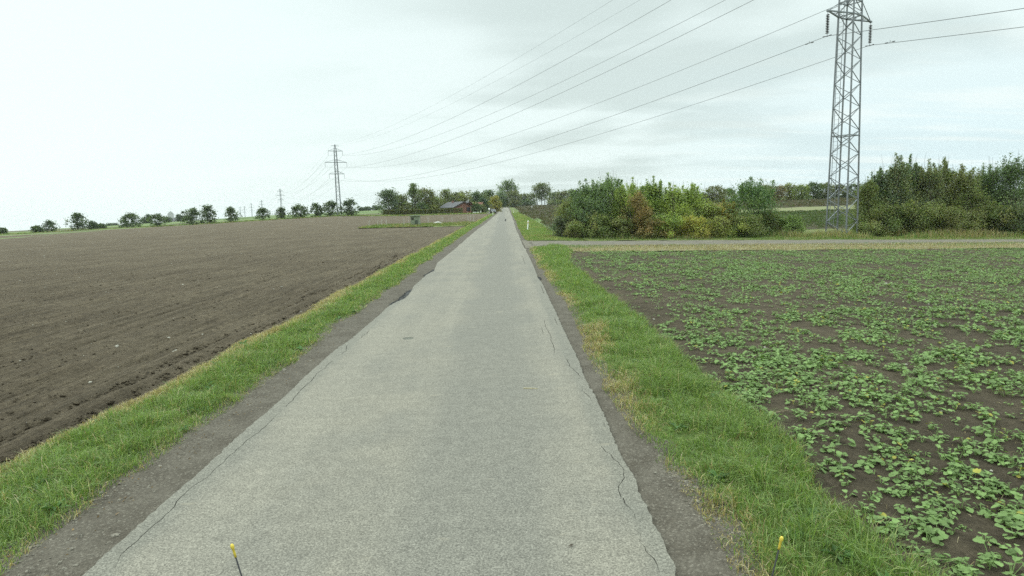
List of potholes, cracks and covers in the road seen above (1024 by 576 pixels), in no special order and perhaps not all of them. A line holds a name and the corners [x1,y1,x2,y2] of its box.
crack [599,425,637,520]
